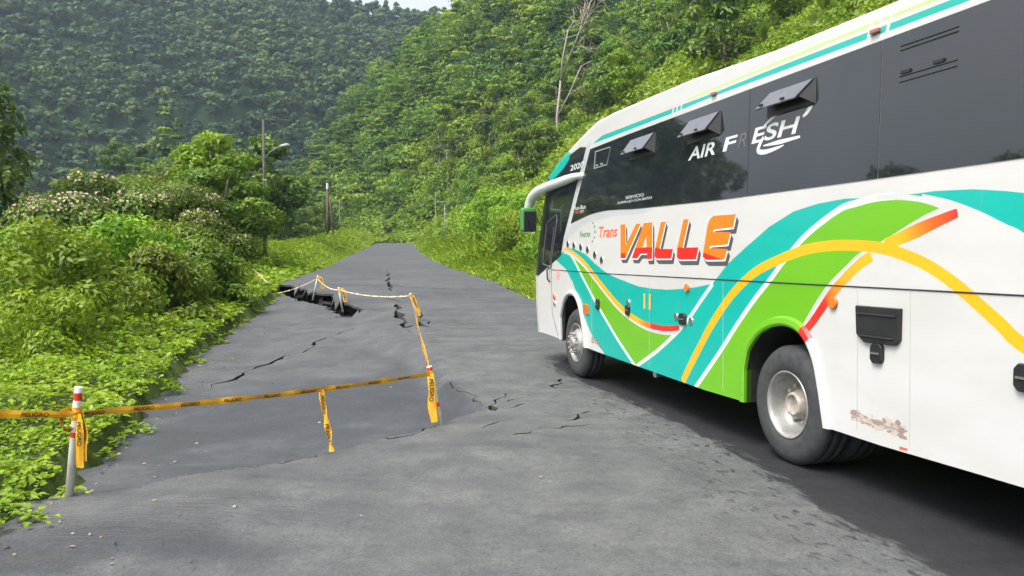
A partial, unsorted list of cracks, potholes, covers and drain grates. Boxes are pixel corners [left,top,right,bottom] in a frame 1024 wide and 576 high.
crack [450,382,597,435]
crack [374,270,462,333]
pothole [279,285,364,318]
crack [210,328,354,387]
